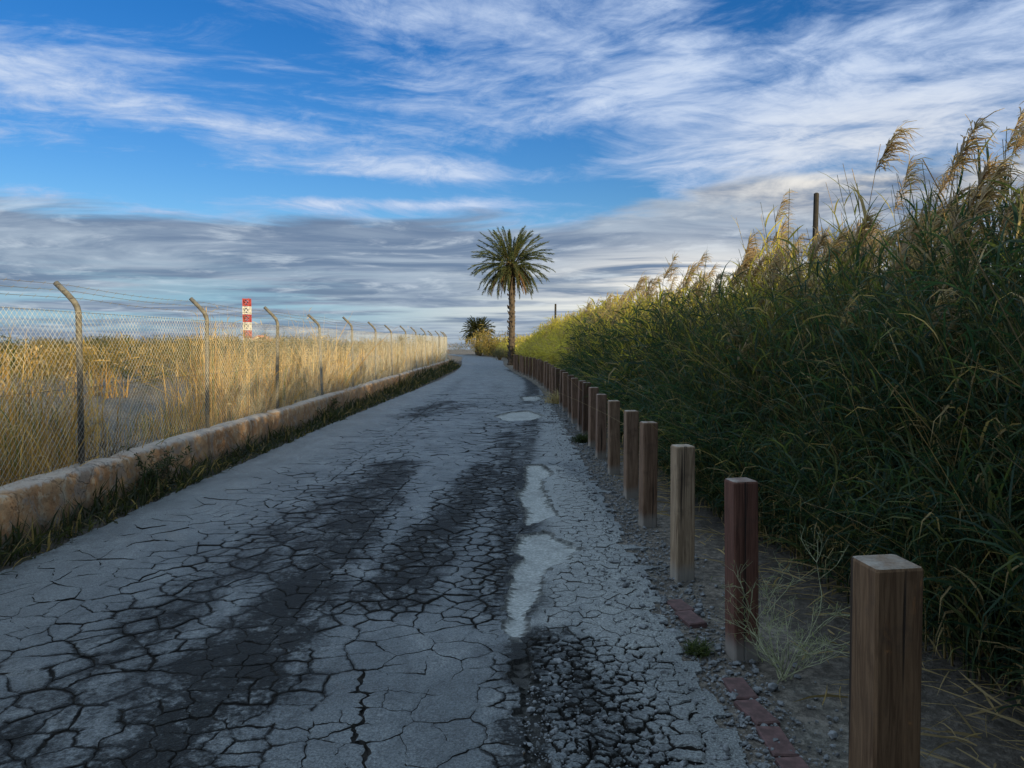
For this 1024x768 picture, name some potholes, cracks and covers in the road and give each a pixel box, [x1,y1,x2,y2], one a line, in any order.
crack [0,393,557,768]
crack [520,460,707,768]
pothole [506,656,559,768]
